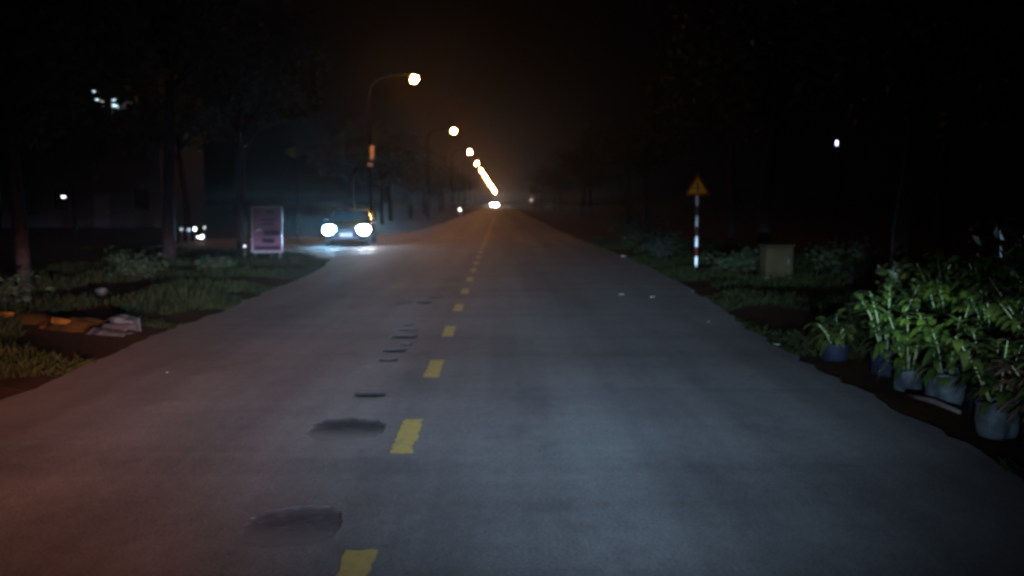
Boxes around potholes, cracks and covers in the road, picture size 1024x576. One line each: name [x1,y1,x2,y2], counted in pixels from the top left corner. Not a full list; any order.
pothole [353,391,386,399]
pothole [306,417,387,441]
pothole [239,505,343,548]
